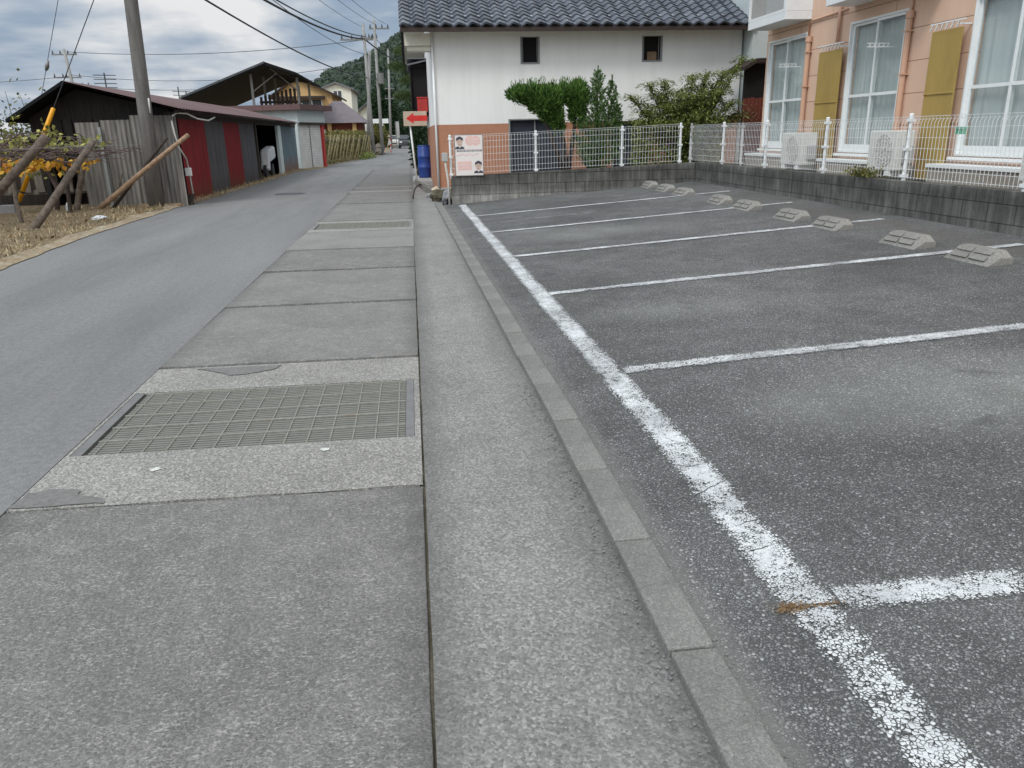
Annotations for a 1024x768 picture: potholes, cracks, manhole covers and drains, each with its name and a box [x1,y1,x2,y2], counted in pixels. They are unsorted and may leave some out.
drain grate [70,380,415,457]
drain grate [311,221,411,230]
